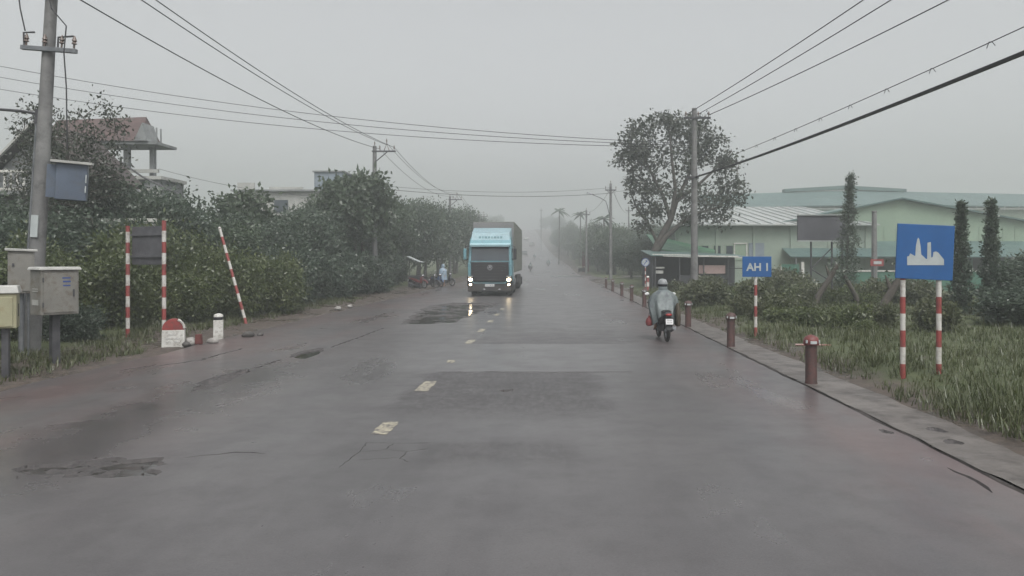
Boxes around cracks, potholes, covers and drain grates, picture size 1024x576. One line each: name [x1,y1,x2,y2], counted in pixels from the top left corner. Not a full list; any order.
pothole [11,457,166,478]
pothole [286,348,324,359]
crack [341,443,423,466]
